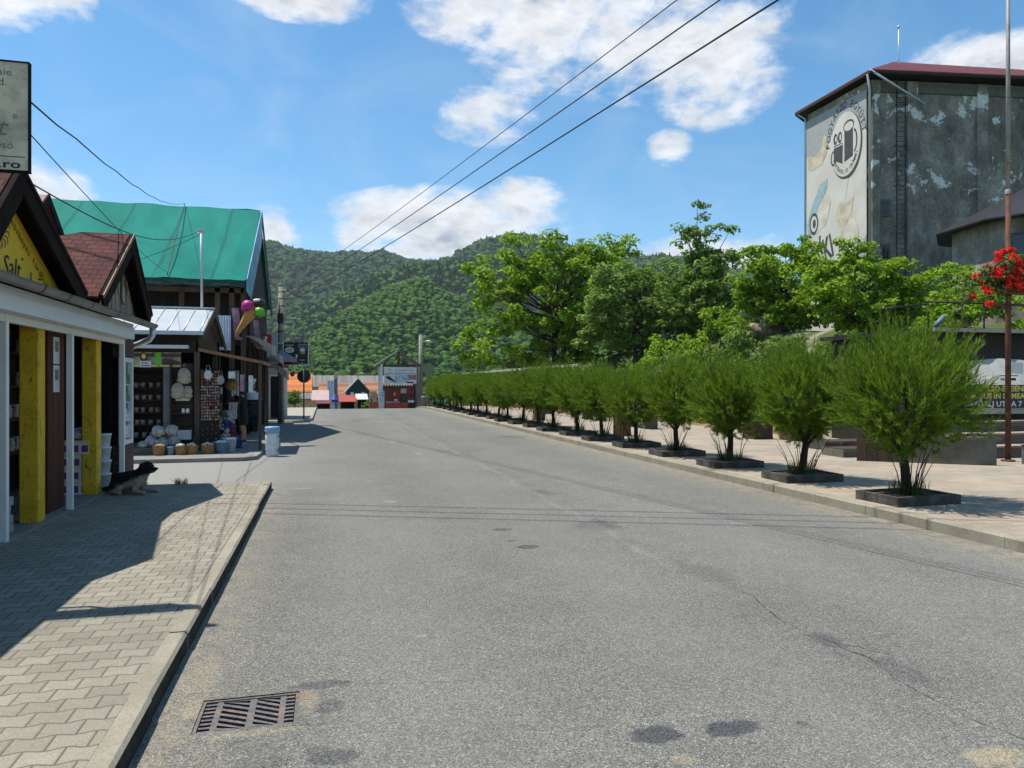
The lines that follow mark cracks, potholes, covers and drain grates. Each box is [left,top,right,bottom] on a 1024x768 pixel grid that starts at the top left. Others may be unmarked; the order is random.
drain grate [191,691,300,734]
crack [732,588,1024,740]
